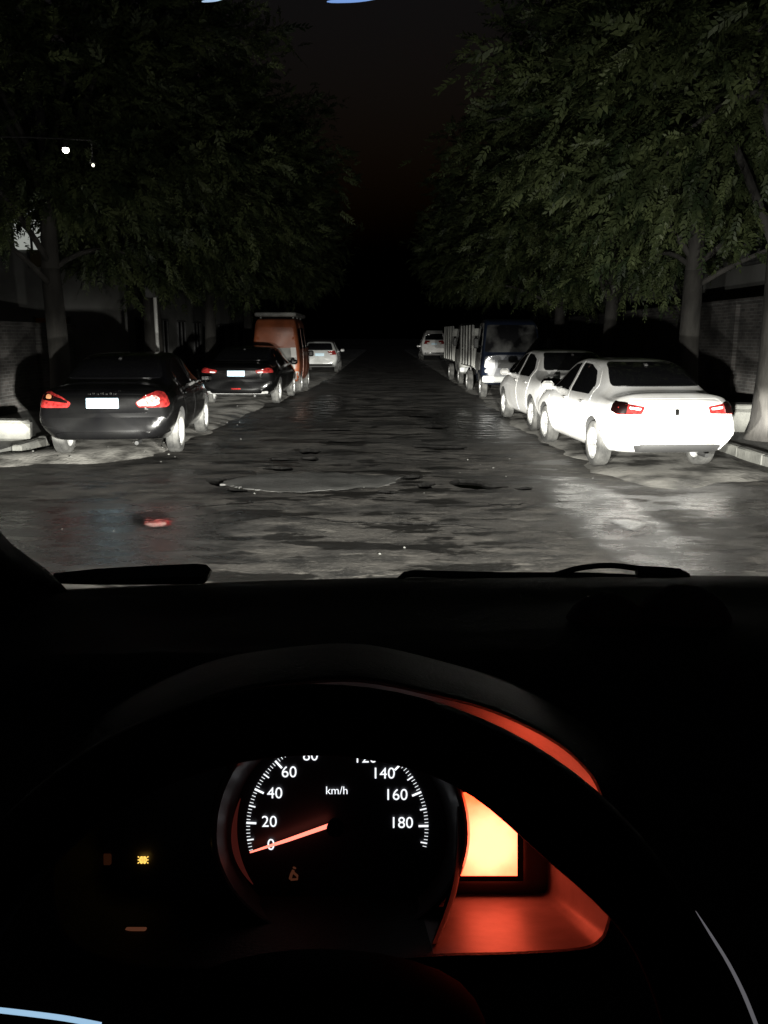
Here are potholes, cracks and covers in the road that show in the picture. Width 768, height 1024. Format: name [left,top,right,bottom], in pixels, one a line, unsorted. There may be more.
pothole [449,479,508,490]
pothole [205,478,227,487]
